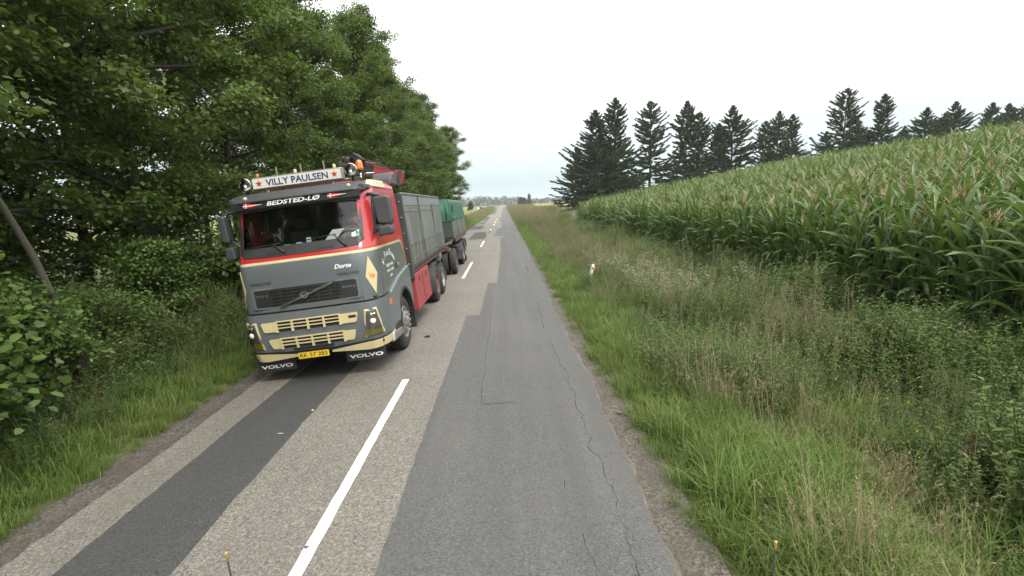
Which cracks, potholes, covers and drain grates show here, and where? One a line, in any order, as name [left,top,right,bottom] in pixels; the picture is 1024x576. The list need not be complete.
crack [538,304,640,576]
